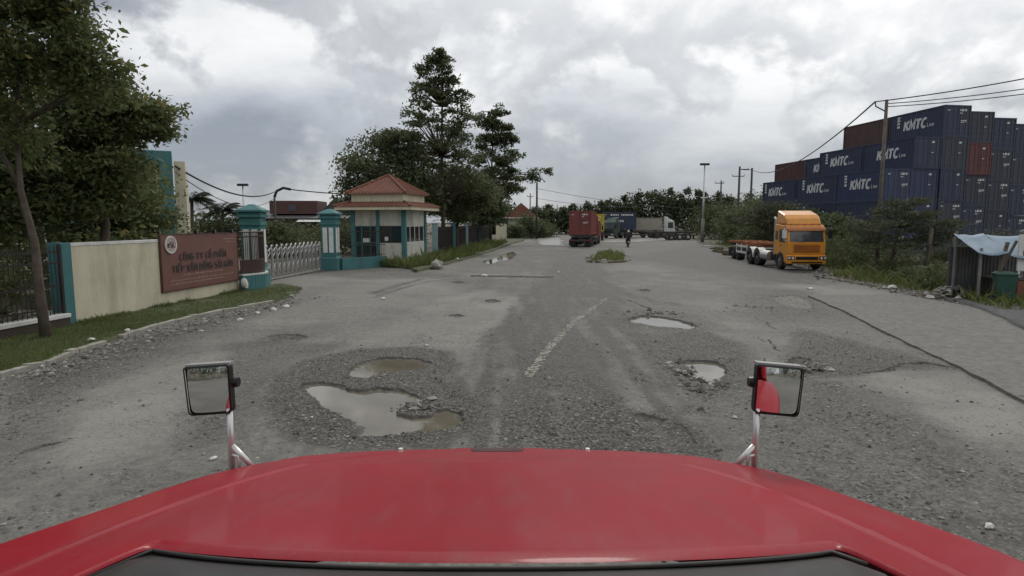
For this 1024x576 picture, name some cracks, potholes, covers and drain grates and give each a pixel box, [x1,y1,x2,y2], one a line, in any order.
crack [854,362,955,374]
pothole [299,381,465,436]
pothole [345,357,432,378]
pothole [627,315,697,329]
pothole [678,359,728,382]
